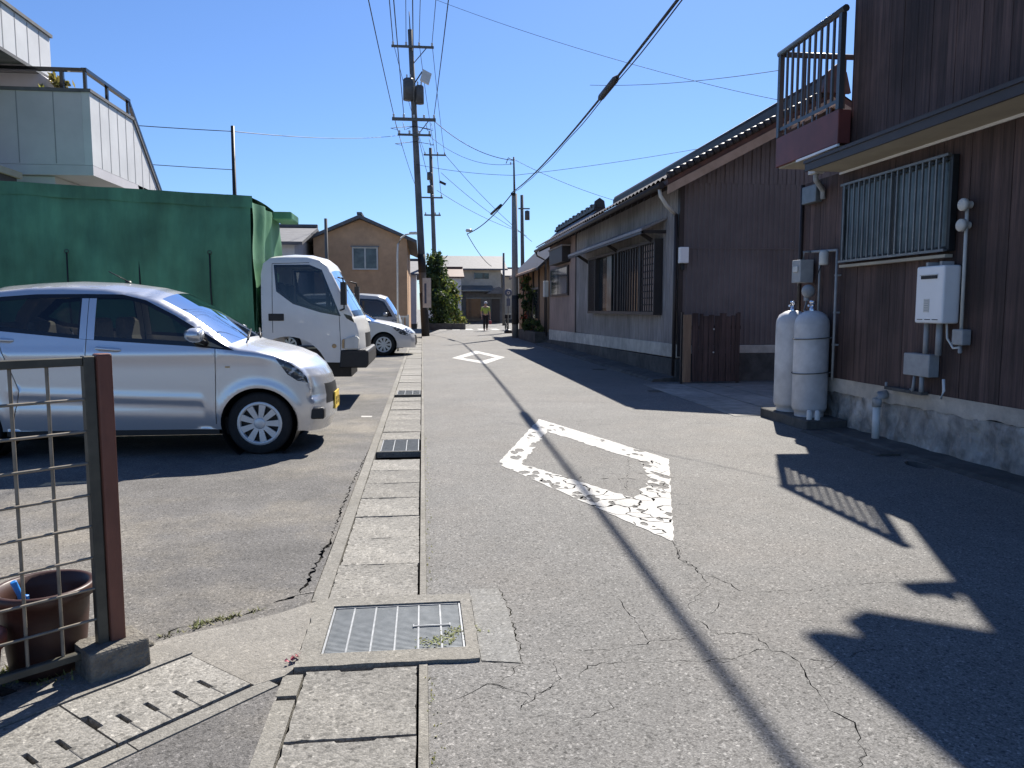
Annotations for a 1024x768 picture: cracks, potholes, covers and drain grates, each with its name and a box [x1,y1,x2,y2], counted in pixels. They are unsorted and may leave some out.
drain grate [376,439,421,458]
drain grate [395,390,421,398]
crack [163,447,370,638]
crack [579,541,890,768]
crack [457,587,562,710]
